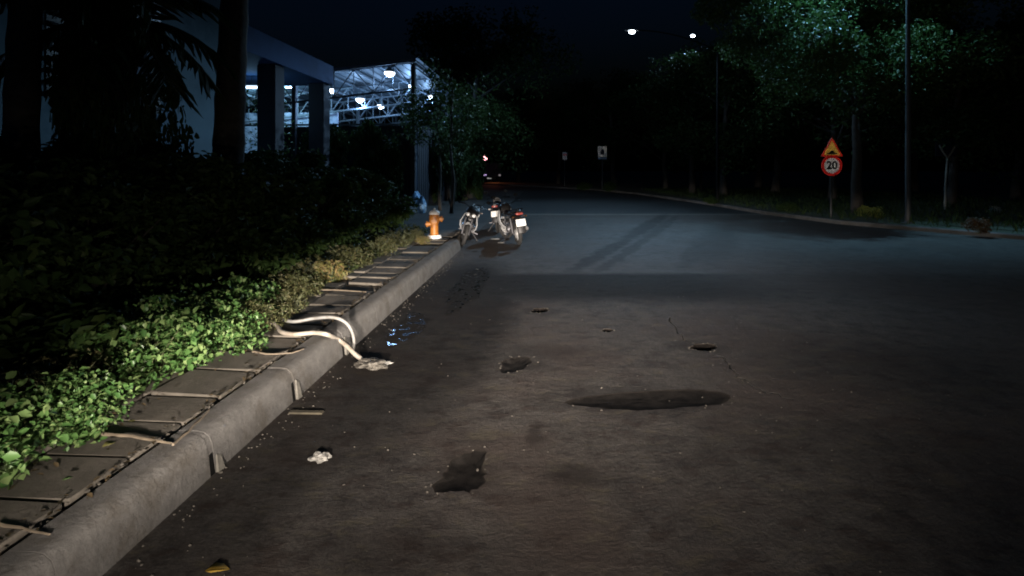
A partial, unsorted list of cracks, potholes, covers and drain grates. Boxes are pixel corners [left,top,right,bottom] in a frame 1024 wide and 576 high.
pothole [564,389,731,411]
pothole [690,343,717,351]
pothole [432,449,487,493]
crack [718,355,785,398]
pothole [500,356,532,373]
